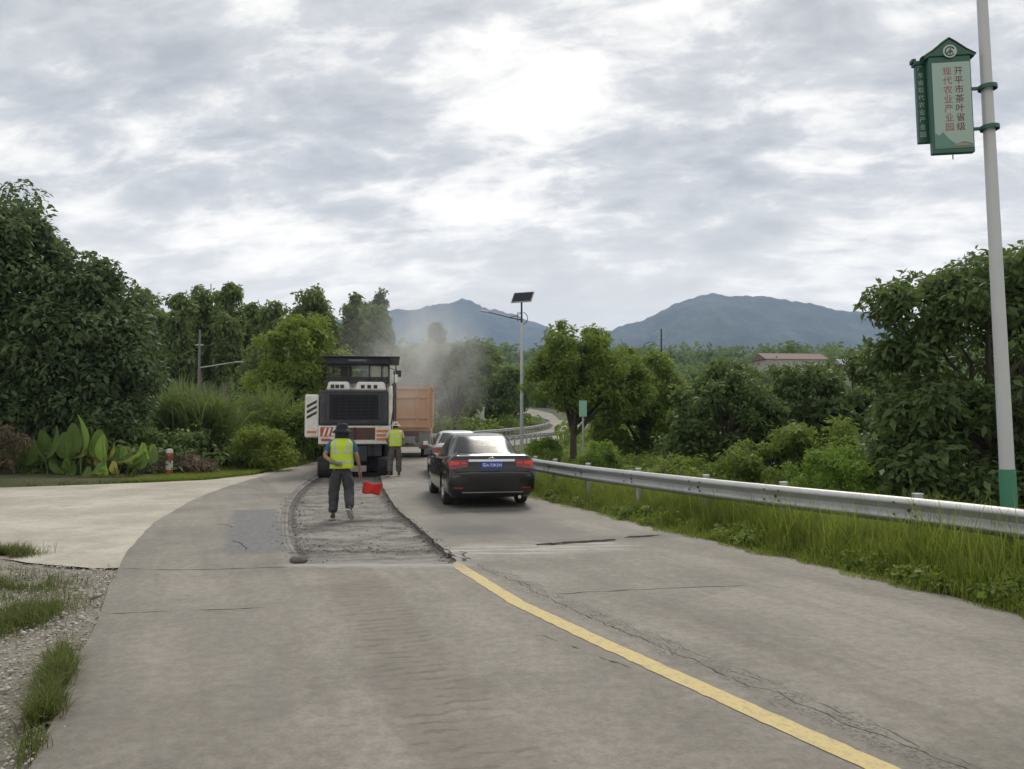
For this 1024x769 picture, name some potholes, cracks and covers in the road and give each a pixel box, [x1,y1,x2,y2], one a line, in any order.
crack [475,564,981,769]
